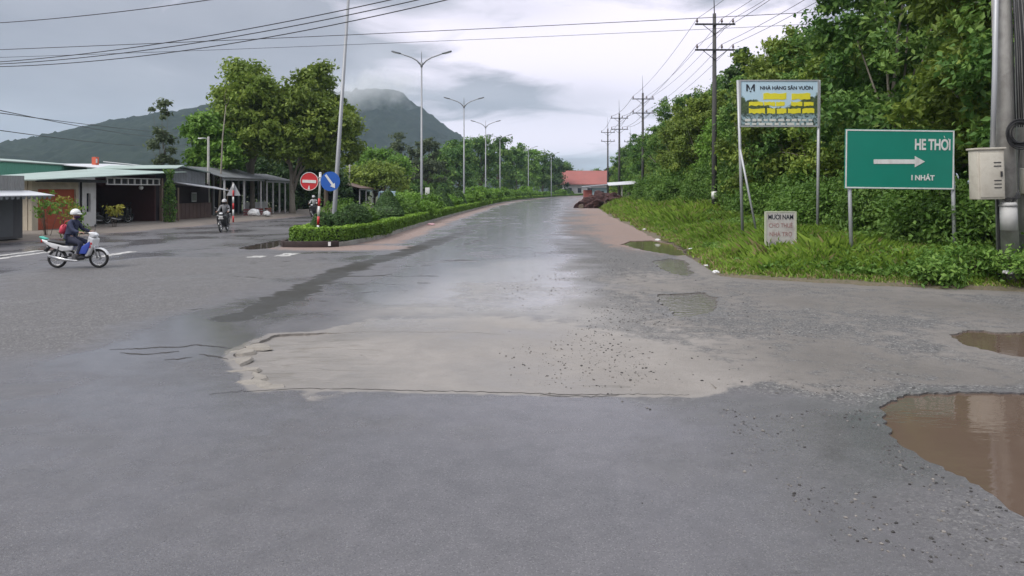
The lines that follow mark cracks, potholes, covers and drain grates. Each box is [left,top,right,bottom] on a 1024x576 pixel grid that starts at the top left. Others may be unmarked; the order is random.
pothole [879,391,1024,517]
crack [110,344,232,360]
pothole [948,330,1024,357]
pothole [621,240,687,256]
pothole [652,258,695,276]
